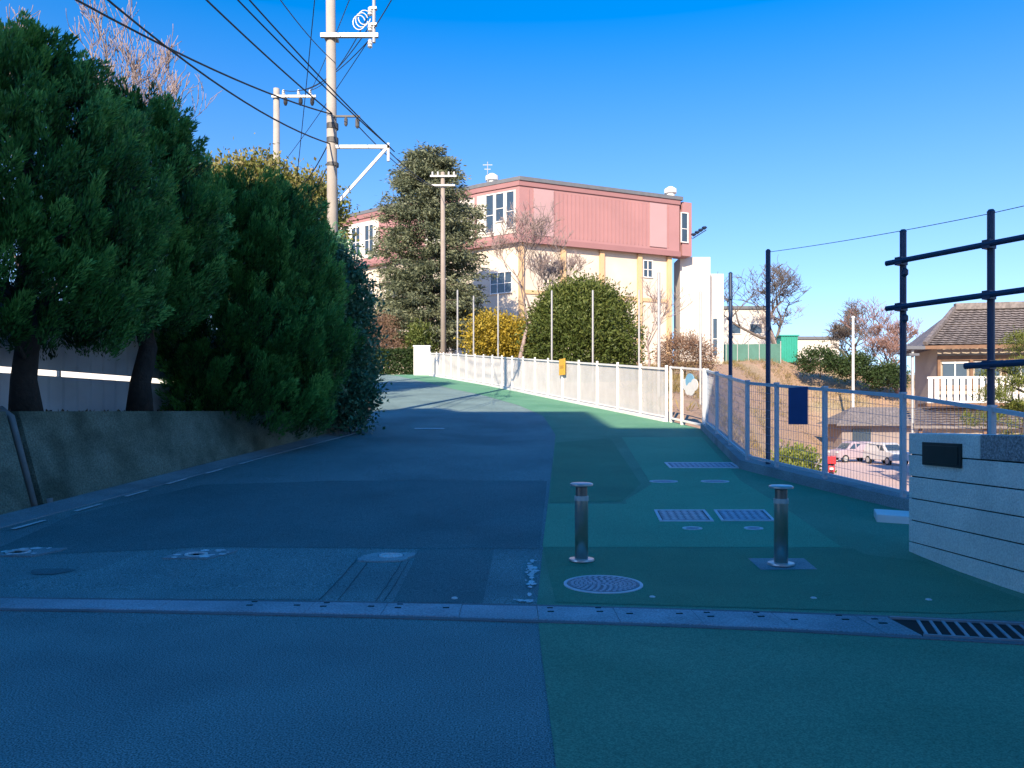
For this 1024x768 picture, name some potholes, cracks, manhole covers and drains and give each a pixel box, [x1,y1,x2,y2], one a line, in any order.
manhole cover [564,575,643,594]
manhole cover [162,549,238,560]
manhole cover [357,552,415,563]
manhole cover [0,547,67,557]
